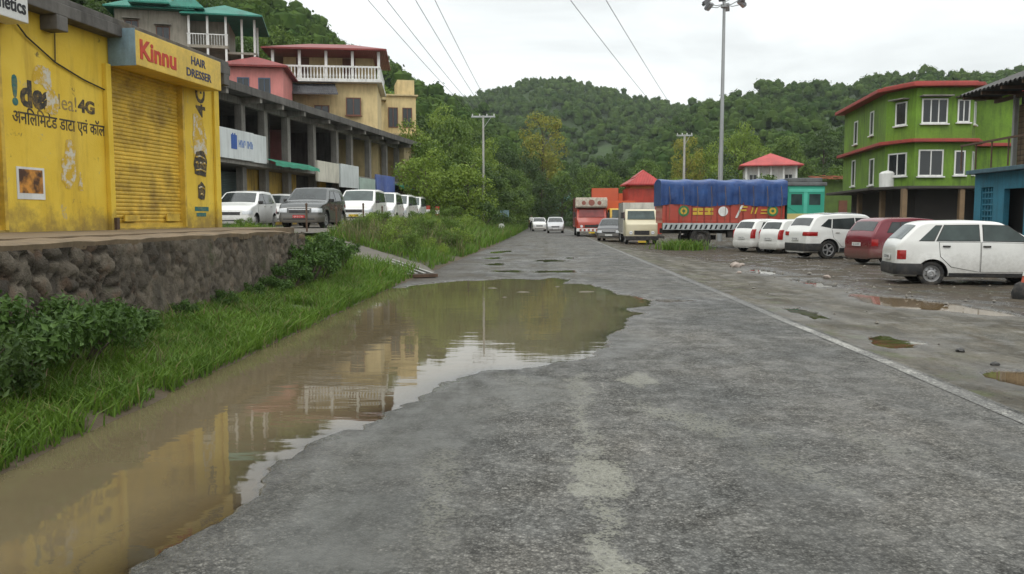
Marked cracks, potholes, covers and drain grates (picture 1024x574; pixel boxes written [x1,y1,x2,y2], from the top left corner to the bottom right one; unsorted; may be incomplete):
pothole [782,307,831,319]
pothole [865,335,930,348]
drain grate [380,259,438,278]
